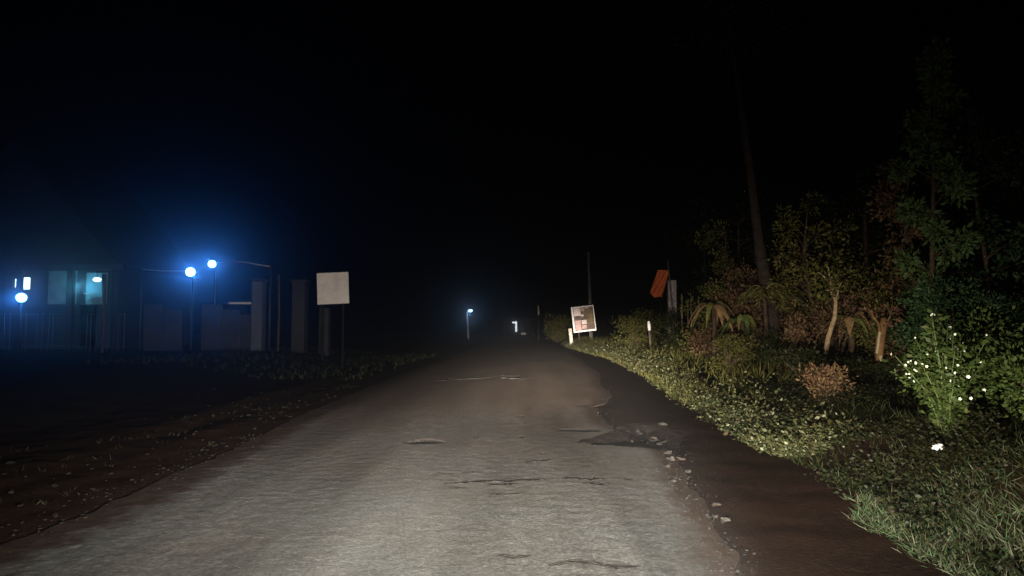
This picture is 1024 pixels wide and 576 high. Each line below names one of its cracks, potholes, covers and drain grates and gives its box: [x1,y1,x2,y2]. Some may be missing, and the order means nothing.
pothole [577,424,684,450]
crack [430,459,611,496]
